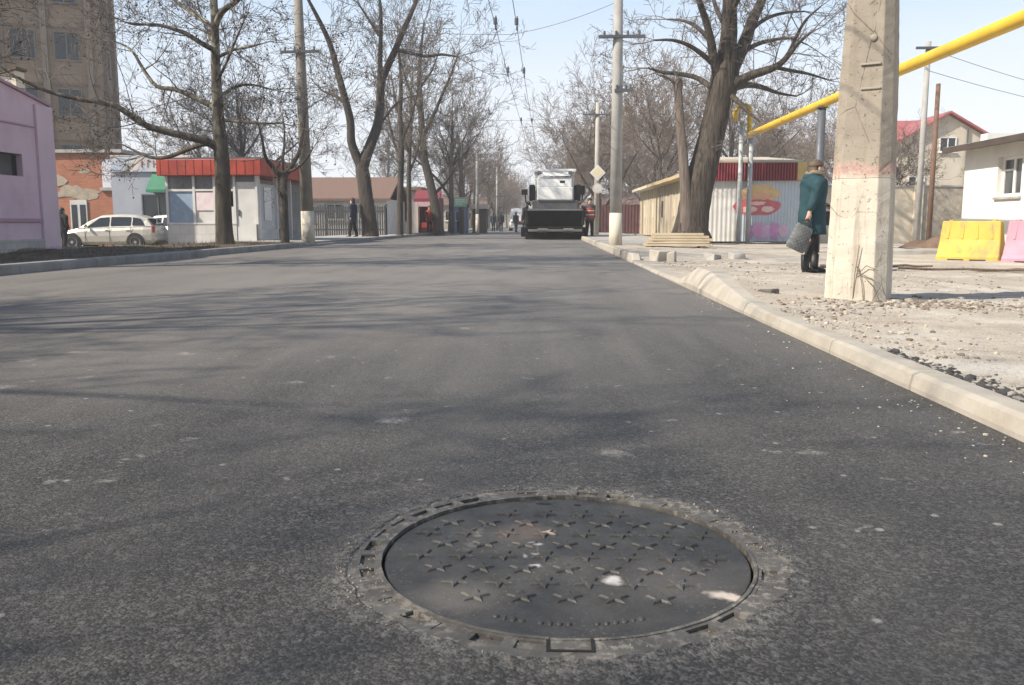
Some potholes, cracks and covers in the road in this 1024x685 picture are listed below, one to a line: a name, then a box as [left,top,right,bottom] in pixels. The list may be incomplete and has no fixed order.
manhole cover [347,489,792,660]
